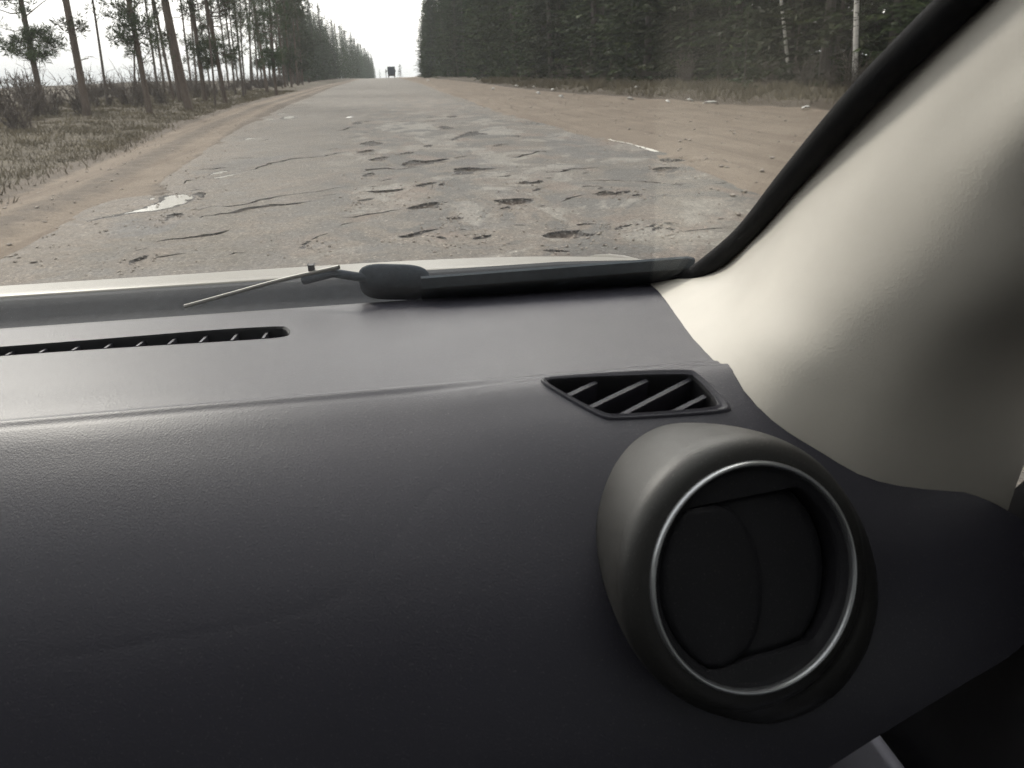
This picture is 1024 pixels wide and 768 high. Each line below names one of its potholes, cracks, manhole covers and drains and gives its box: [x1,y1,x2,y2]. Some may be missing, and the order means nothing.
pothole [450,131,487,141]
pothole [406,202,441,210]
crack [136,118,465,258]
pothole [401,158,449,168]
pothole [453,167,496,175]
pothole [398,229,437,238]
pothole [541,230,595,239]
